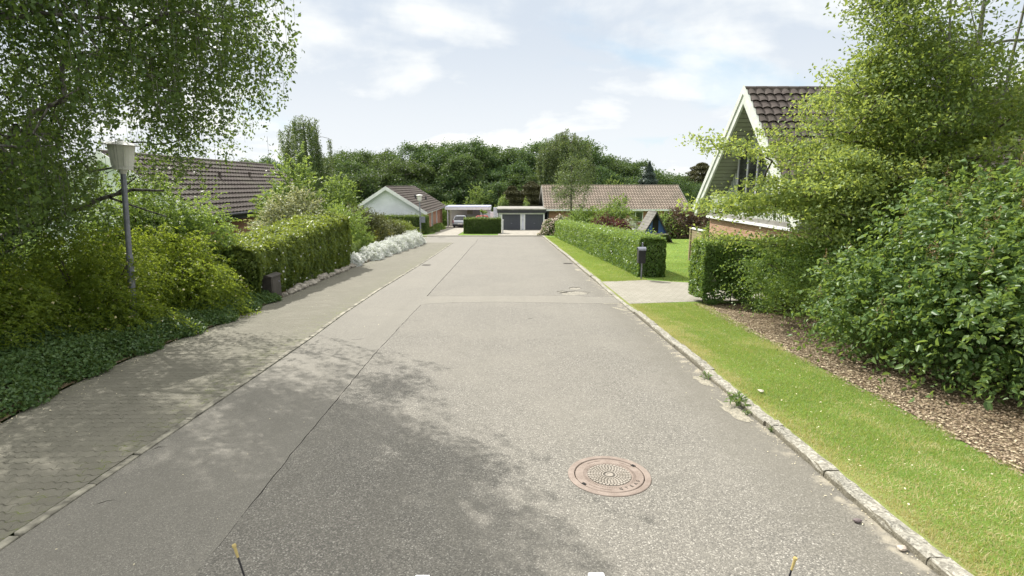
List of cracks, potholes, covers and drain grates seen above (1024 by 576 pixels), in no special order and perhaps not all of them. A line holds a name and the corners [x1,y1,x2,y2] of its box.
manhole cover [568,456,652,497]
